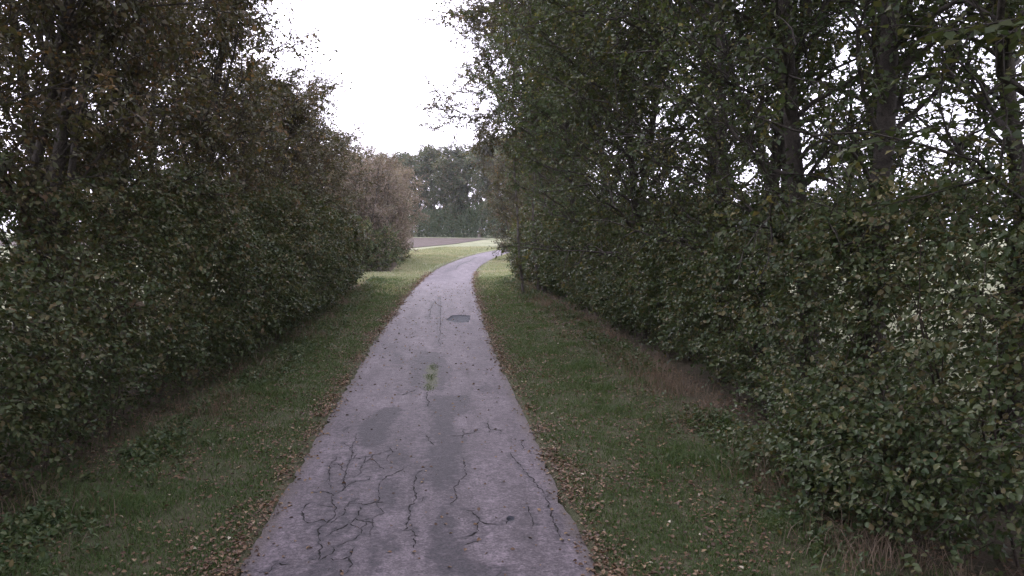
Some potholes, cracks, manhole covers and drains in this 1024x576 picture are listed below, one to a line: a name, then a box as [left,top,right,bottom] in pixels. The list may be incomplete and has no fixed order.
crack [510,440,580,537]
crack [301,431,424,574]
crack [450,460,508,545]
pothole [446,315,470,323]
